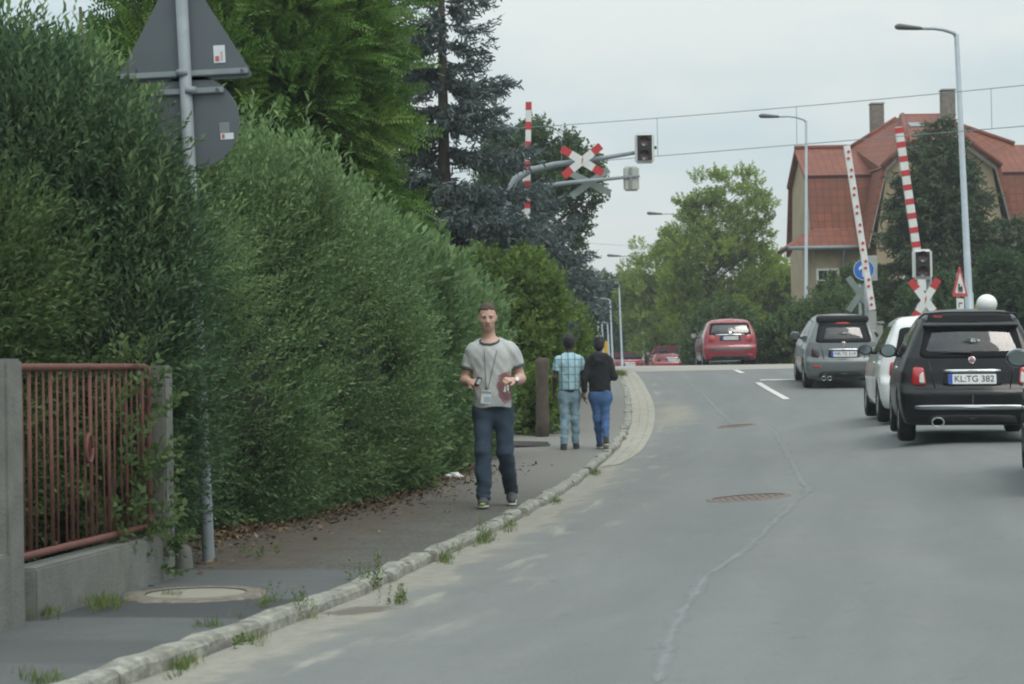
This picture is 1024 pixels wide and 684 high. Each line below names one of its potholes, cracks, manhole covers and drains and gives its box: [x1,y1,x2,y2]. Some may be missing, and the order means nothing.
manhole cover [122,585,270,603]
crack [654,379,811,683]
manhole cover [706,493,792,503]
